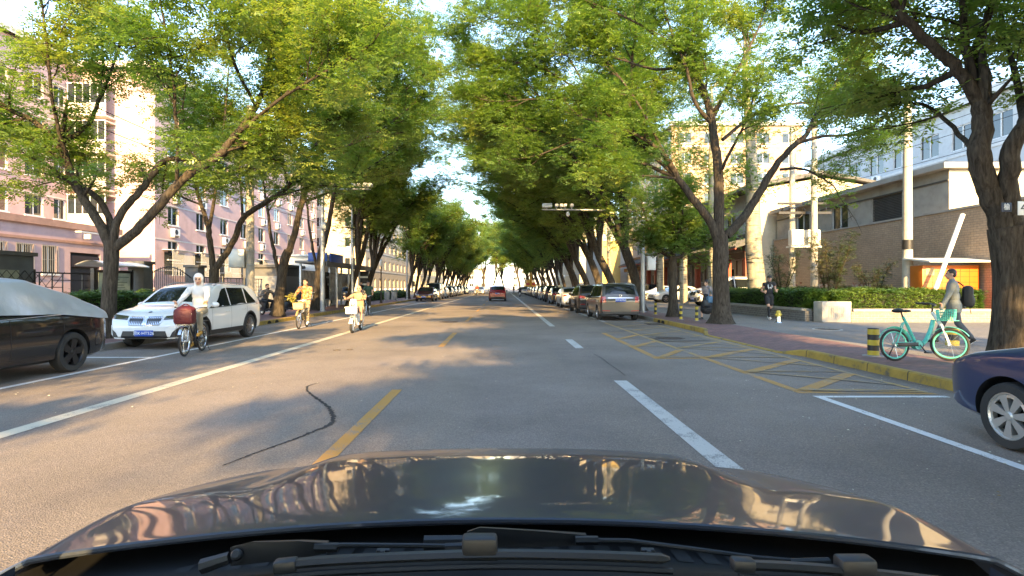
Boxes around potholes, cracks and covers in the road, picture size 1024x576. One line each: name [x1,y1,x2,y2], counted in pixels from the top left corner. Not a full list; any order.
crack [224,383,337,465]
